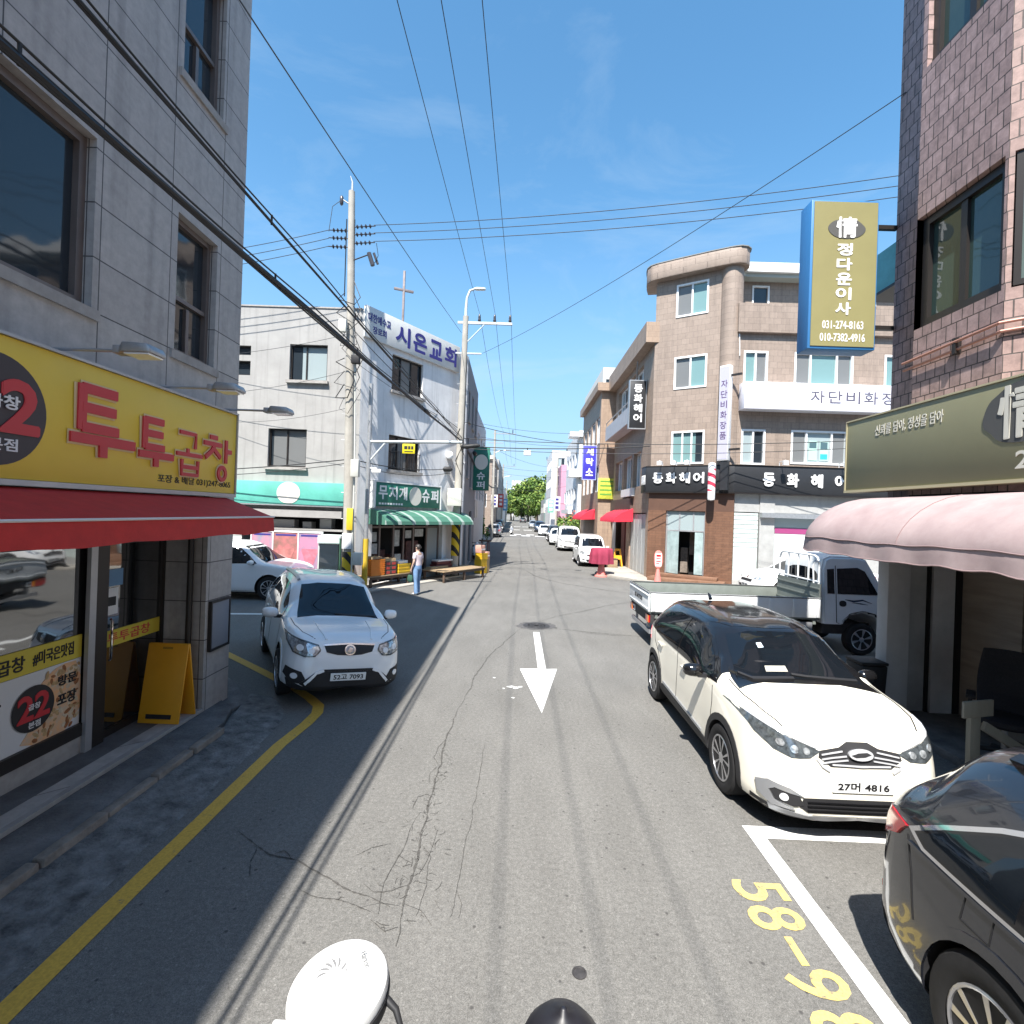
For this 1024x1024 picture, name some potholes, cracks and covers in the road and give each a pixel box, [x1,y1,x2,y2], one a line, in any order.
manhole cover [516,622,557,630]
crack [240,630,518,946]
